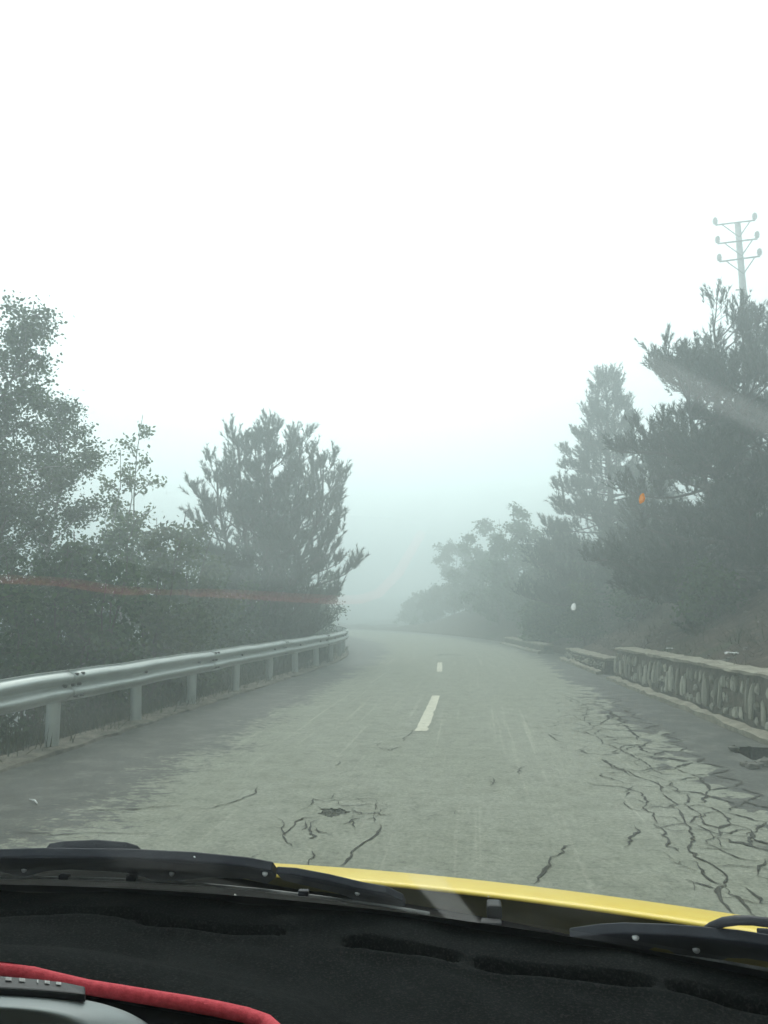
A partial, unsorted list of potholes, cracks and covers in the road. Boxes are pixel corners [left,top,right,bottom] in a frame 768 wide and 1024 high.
crack [273,792,437,866]
crack [83,788,257,811]
pothole [317,808,351,817]
crack [521,695,768,916]
pothole [734,746,768,760]
